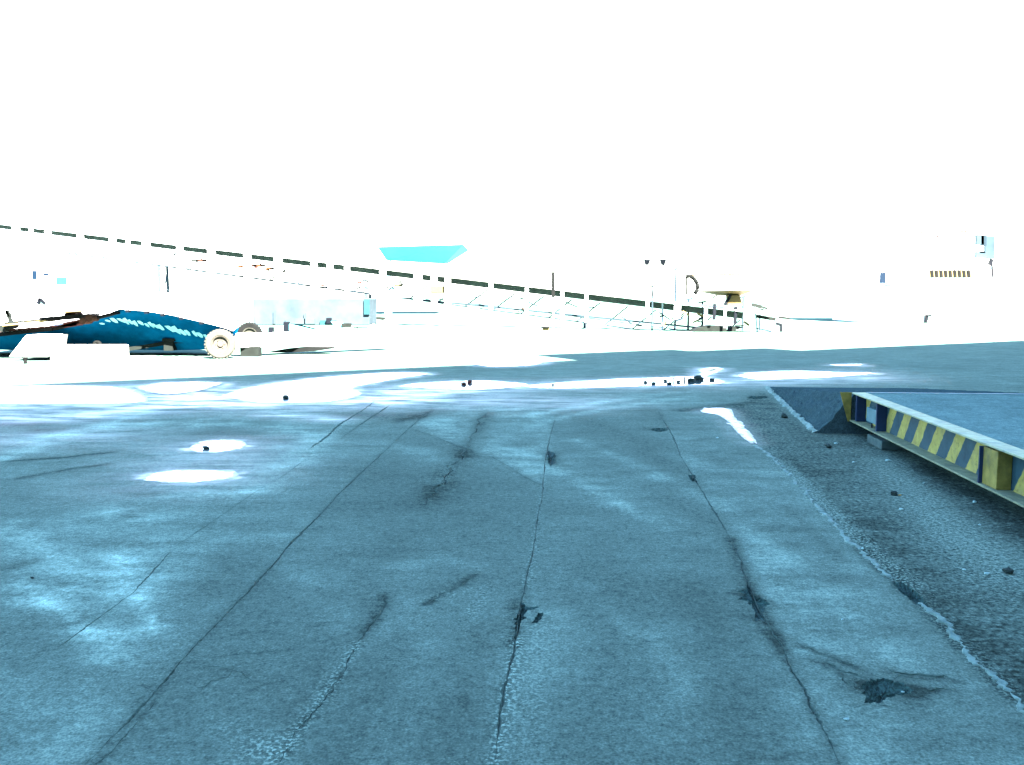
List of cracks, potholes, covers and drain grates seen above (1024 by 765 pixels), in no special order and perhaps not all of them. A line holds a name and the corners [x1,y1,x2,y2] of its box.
crack [199,631,295,693]
pothole [860,678,914,704]
crack [278,592,388,765]
crack [425,415,486,504]
